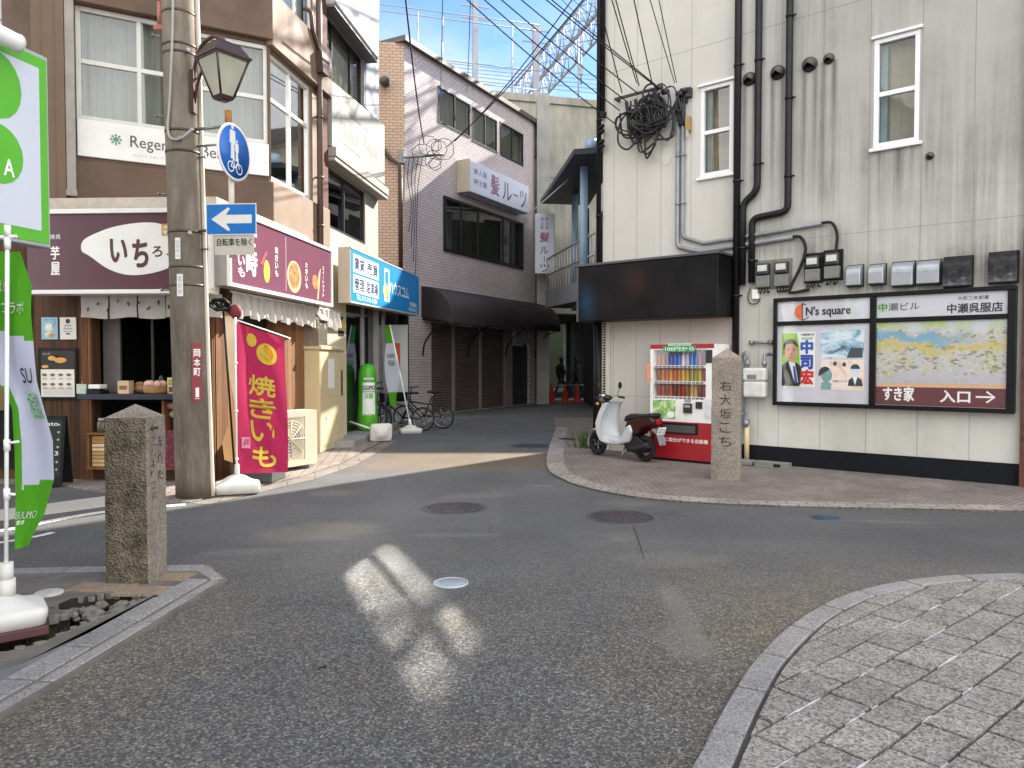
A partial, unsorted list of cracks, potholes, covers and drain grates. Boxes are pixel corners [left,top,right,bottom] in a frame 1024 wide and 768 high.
manhole cover [421,502,488,515]
manhole cover [586,510,659,525]
